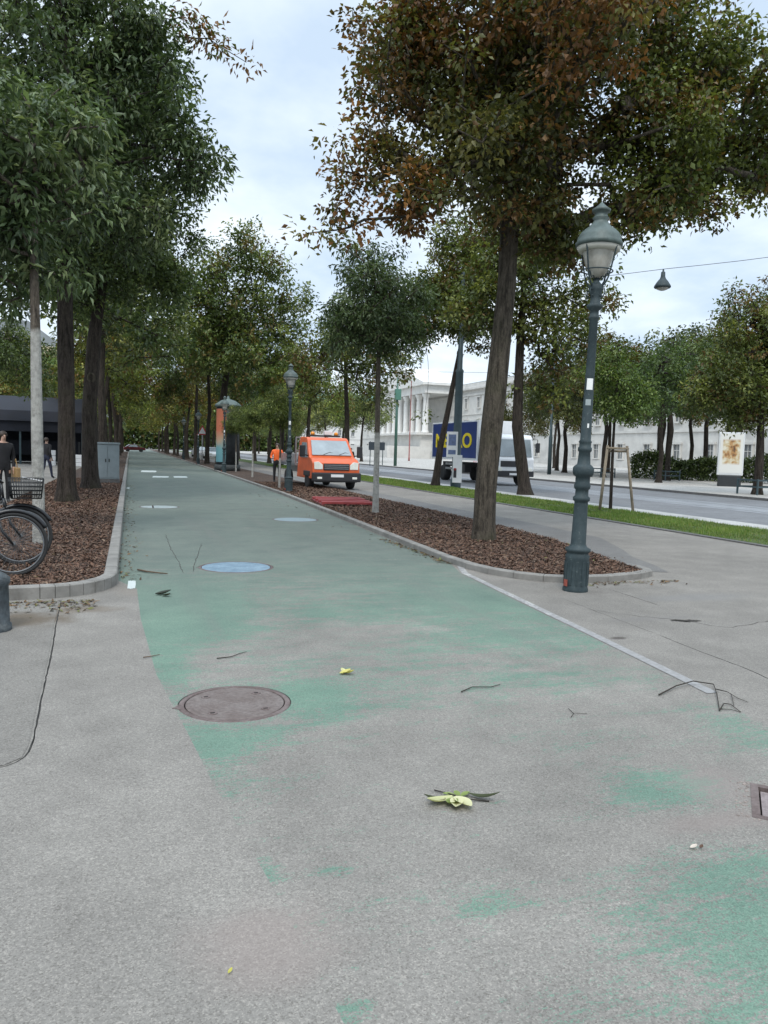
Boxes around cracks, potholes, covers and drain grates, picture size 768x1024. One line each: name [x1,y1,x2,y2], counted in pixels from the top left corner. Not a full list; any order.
crack [596,610,768,628]
manhole cover [196,561,273,573]
manhole cover [172,686,290,722]
